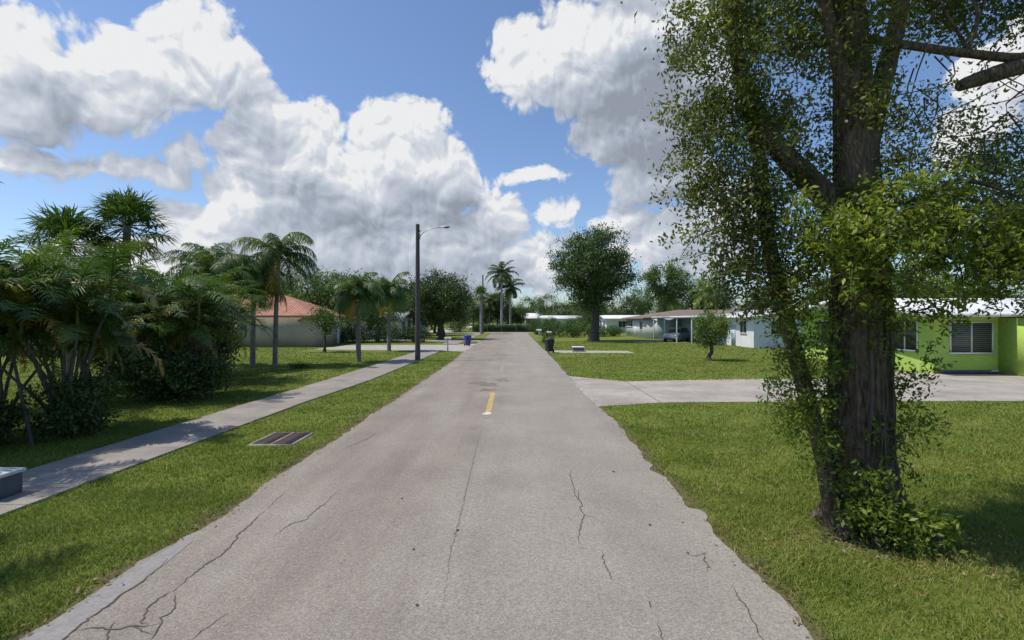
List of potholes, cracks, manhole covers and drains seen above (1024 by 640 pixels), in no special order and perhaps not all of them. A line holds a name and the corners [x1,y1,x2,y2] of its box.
crack [62,492,285,640]
crack [734,588,763,639]
crack [570,470,595,544]
drain grate [248,432,315,446]
